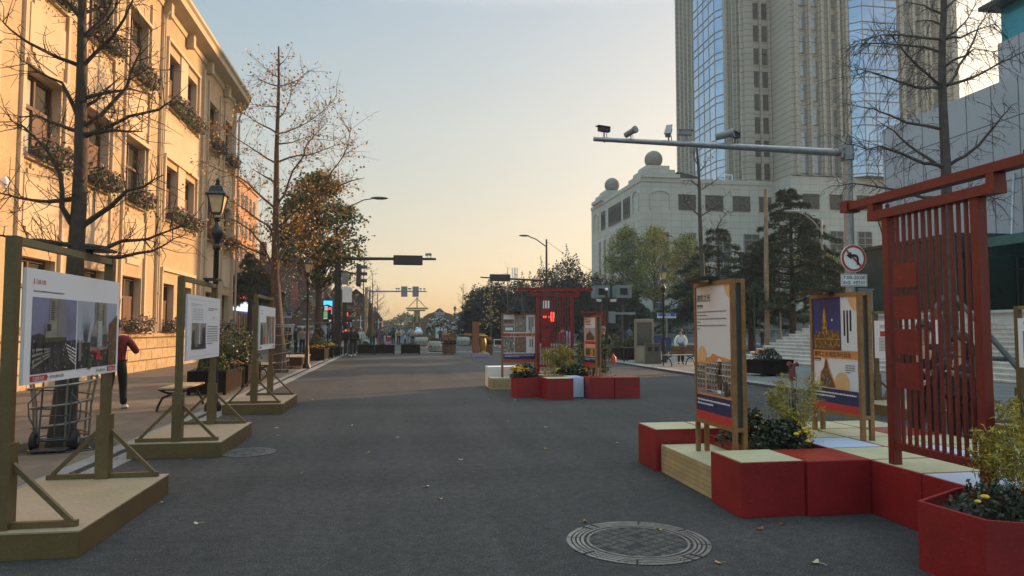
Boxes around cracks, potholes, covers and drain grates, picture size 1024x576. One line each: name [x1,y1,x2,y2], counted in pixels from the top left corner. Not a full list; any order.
manhole cover [567,521,712,565]
manhole cover [222,448,276,457]
